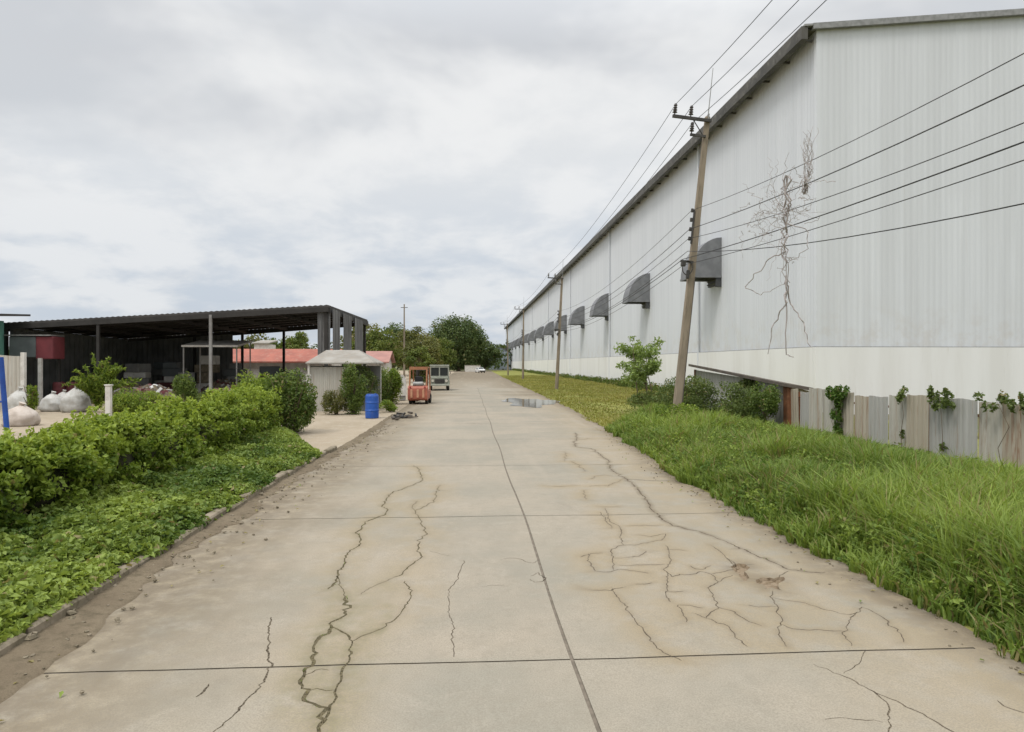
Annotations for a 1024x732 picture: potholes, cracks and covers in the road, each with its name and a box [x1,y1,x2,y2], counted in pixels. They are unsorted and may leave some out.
crack [298,466,465,732]
crack [556,433,954,732]
crack [196,617,274,732]
